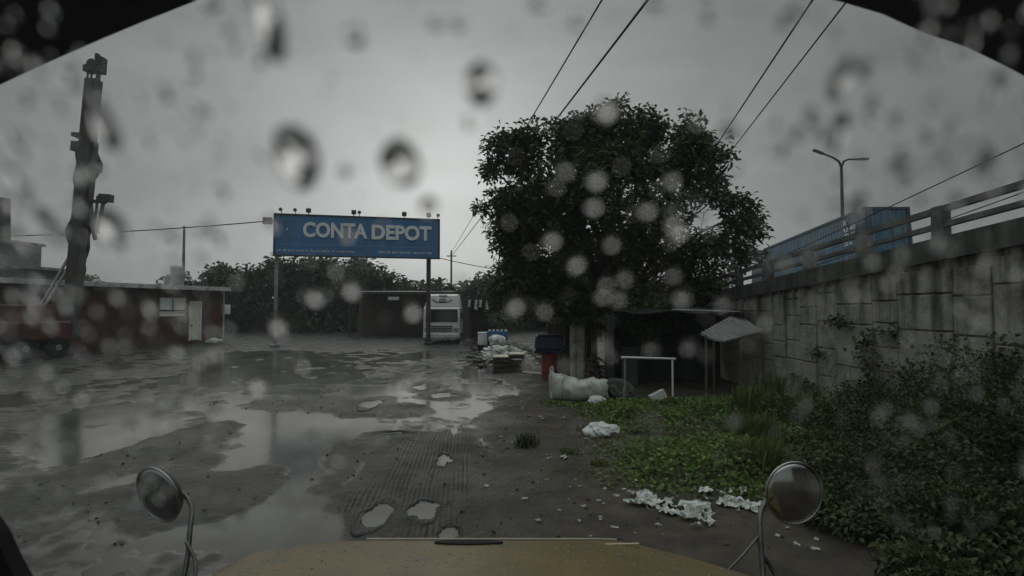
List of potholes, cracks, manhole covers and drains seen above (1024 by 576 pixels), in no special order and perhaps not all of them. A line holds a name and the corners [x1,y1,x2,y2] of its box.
pothole [350,495,400,538]
pothole [418,391,466,400]
pothole [401,498,451,526]
pothole [354,398,389,411]
pothole [433,522,463,538]
pothole [432,451,458,468]
pothole [408,382,441,391]
